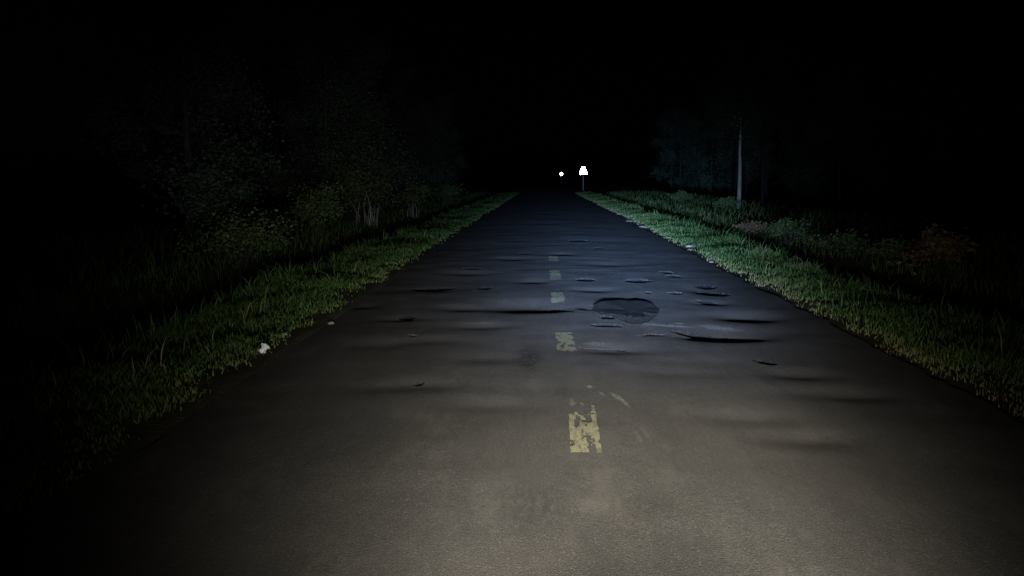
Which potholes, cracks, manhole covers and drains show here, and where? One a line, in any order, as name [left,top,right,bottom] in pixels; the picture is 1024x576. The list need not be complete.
pothole [592,299,660,324]
pothole [670,330,765,342]
